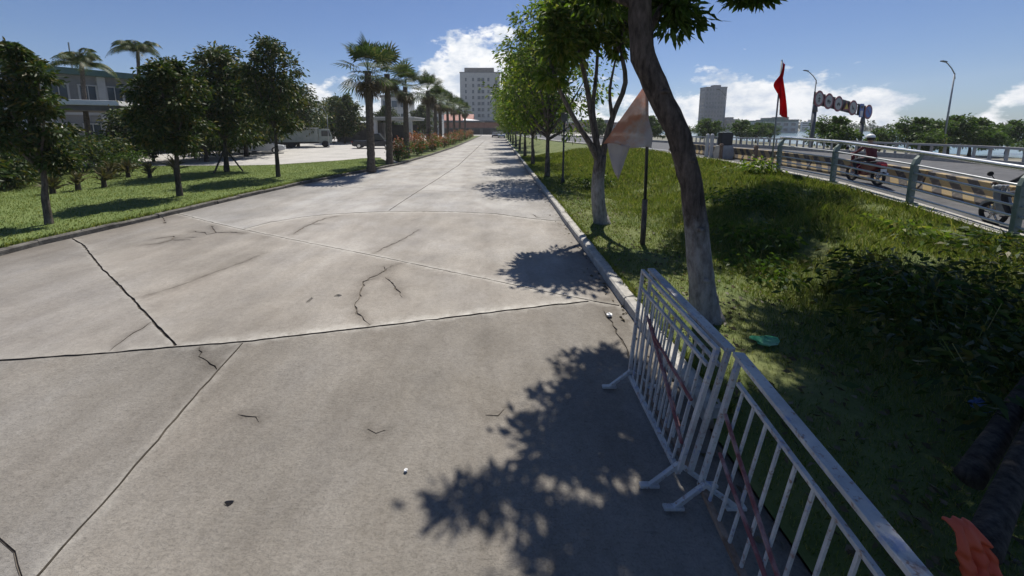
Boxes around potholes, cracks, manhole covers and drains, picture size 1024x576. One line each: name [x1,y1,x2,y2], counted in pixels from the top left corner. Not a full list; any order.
crack [354,232,414,324]
crack [604,312,645,376]
